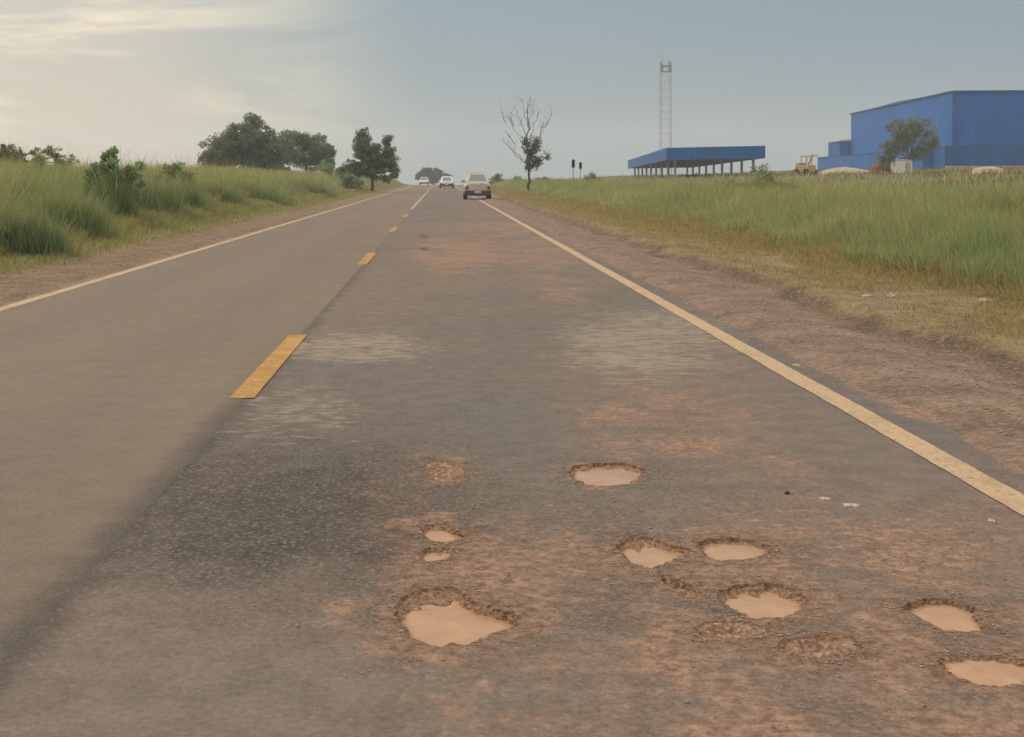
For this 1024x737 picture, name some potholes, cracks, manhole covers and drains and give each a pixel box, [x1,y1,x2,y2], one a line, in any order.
pothole [615,536,692,568]
pothole [899,598,992,632]
pothole [418,547,455,562]
pothole [567,463,647,486]
pothole [695,537,771,561]
pothole [935,654,1024,688]
pothole [423,461,466,482]
pothole [716,583,810,630]
pothole [419,523,471,542]
pothole [693,620,774,640]
pothole [393,586,523,648]
pothole [777,633,866,660]
